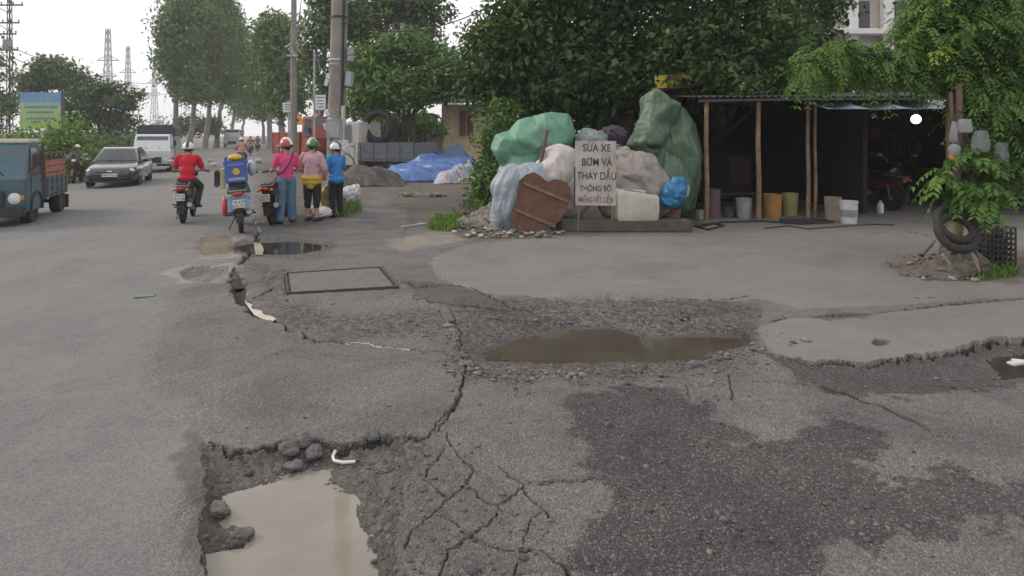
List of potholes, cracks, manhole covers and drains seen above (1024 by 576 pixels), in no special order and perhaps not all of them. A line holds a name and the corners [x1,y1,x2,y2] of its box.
pothole [455,317,756,375]
crack [685,296,1024,439]
pothole [177,264,231,283]
pothole [196,434,427,576]
pothole [183,232,235,258]
manhole cover [285,266,398,295]
pothole [229,236,338,261]
crack [202,218,594,576]
